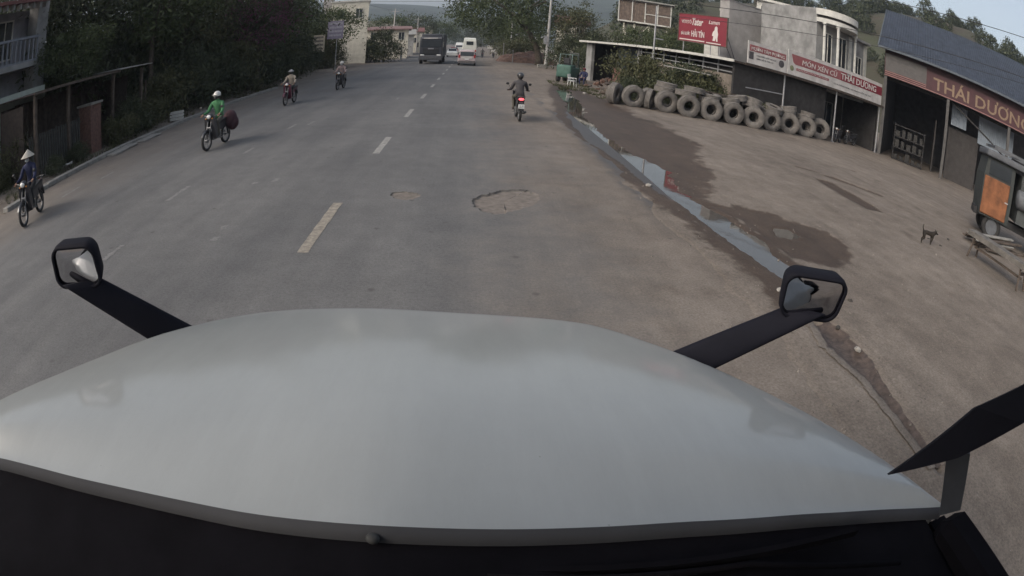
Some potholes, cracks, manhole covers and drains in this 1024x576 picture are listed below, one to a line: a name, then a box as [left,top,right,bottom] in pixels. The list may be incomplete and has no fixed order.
crack [807,319,946,469]
pothole [390,191,420,200]
pothole [472,189,541,214]
